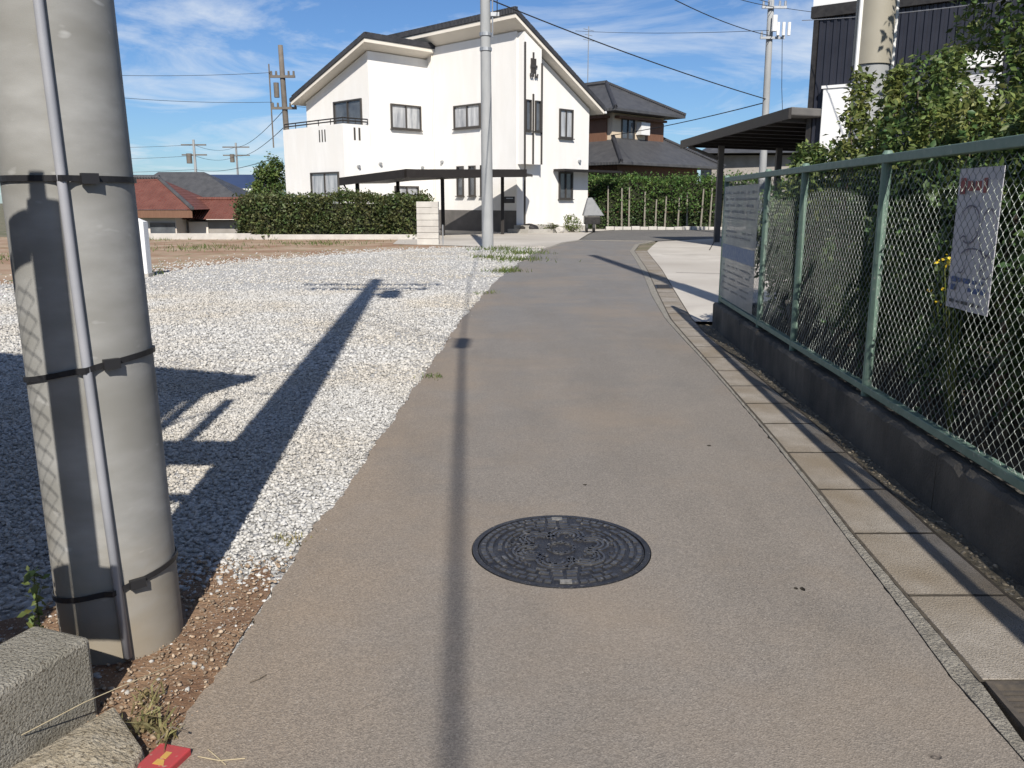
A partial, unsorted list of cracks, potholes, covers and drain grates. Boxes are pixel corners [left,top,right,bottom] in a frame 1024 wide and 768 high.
manhole cover [473,515,650,589]
